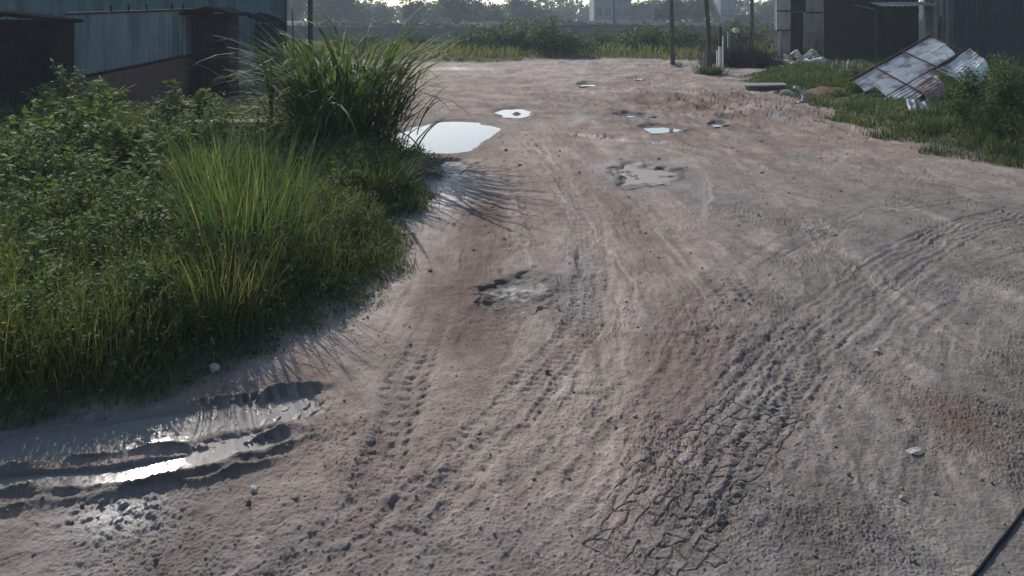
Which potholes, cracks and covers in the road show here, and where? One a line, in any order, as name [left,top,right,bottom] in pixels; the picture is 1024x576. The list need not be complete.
crack [580,388,817,576]
pothole [608,159,689,190]
pothole [635,122,692,135]
pothole [468,268,565,315]
pothole [489,105,536,119]
pothole [391,118,509,155]
